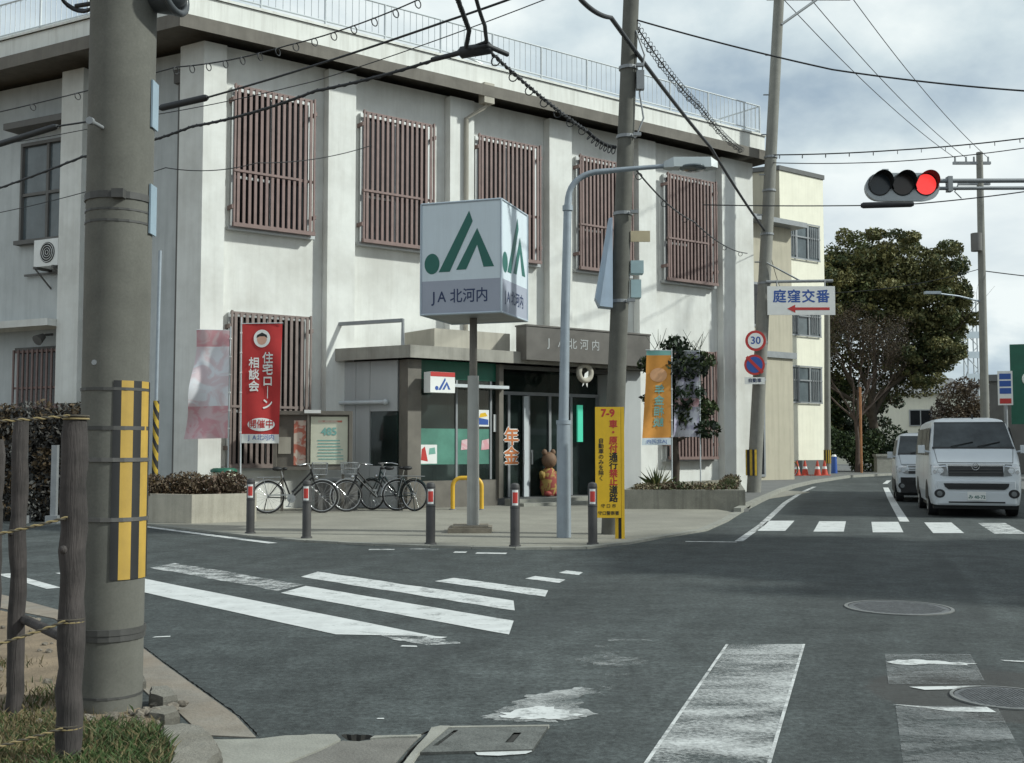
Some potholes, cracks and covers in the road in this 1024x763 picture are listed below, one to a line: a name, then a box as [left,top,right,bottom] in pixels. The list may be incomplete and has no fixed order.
manhole cover [844,600,955,616]
manhole cover [949,686,1024,711]
